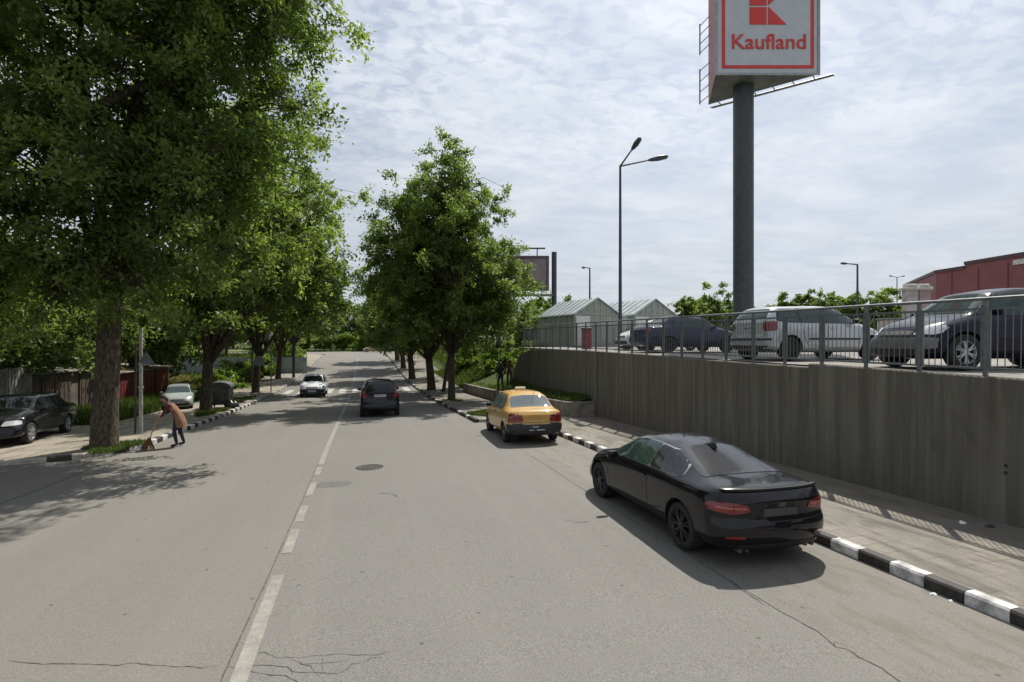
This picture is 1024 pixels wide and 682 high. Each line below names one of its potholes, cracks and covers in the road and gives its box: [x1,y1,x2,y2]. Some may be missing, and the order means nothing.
crack [9,660,217,668]
crack [230,652,385,682]
